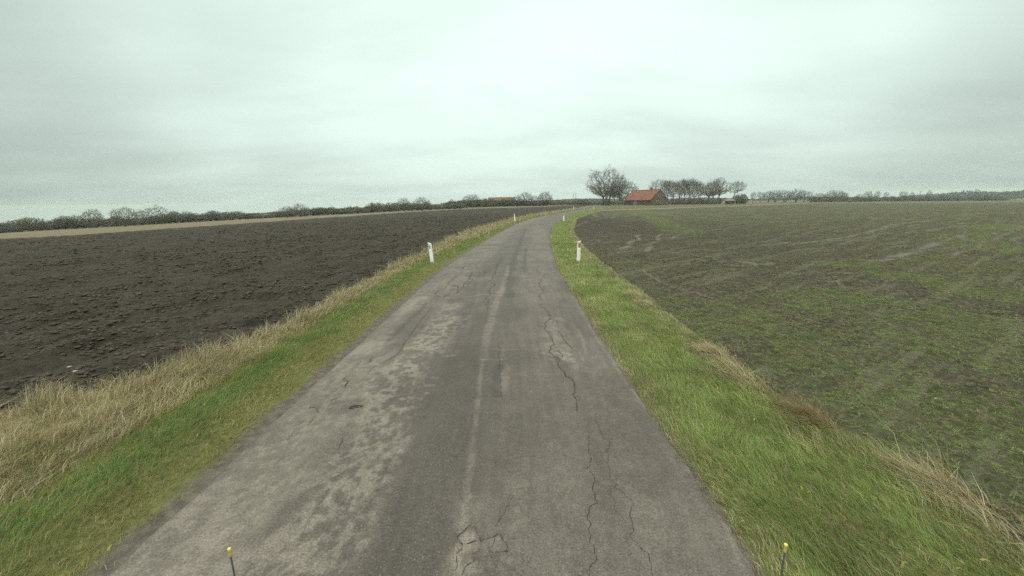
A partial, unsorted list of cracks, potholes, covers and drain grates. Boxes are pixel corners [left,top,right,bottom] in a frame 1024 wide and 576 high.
crack [455,500,511,575]
crack [537,267,578,411]
crack [586,423,653,576]
